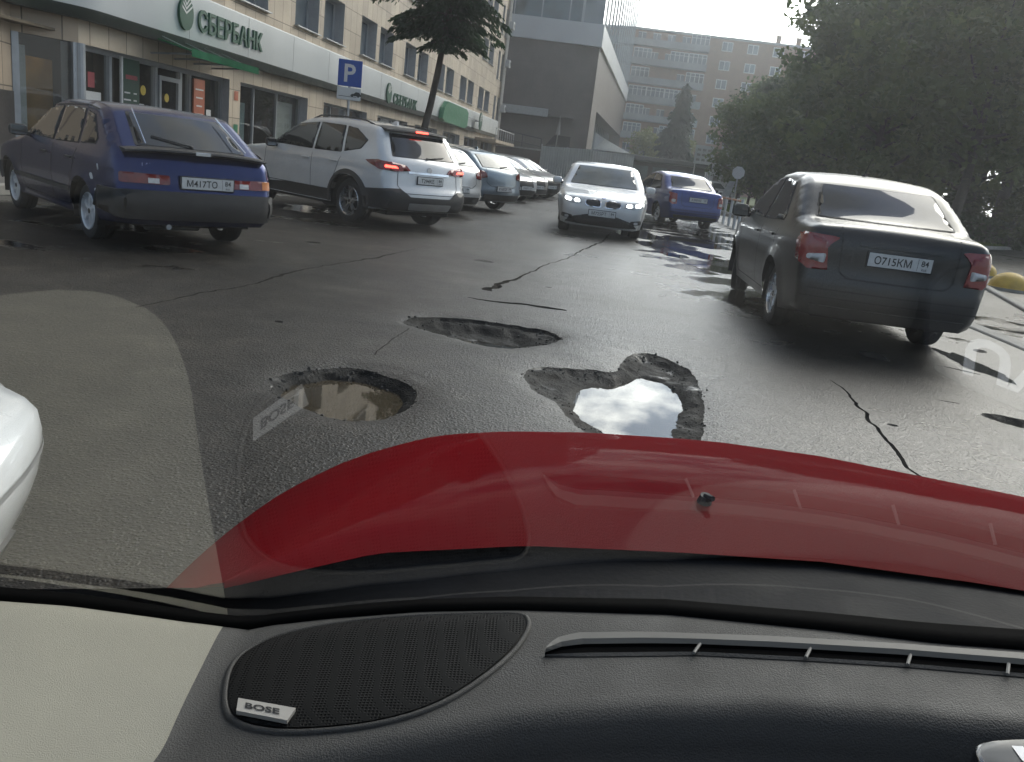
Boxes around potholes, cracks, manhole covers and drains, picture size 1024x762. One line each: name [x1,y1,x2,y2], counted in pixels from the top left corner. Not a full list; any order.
pothole [269,366,417,421]
pothole [521,353,710,440]
crack [830,380,921,476]
crack [469,297,566,311]
pothole [403,316,562,348]
